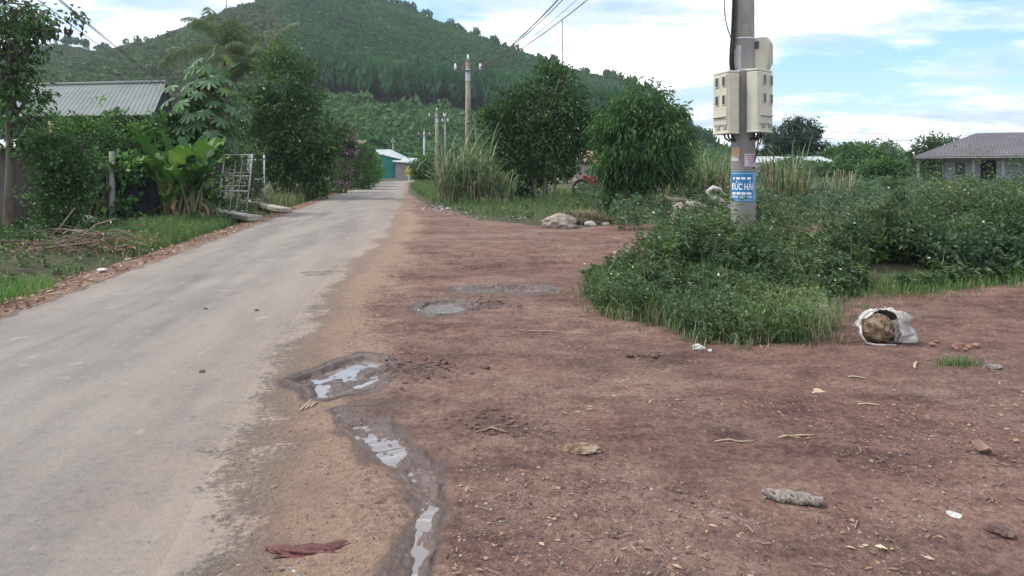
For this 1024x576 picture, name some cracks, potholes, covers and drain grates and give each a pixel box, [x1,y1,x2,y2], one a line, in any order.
pothole [282,351,399,402]
